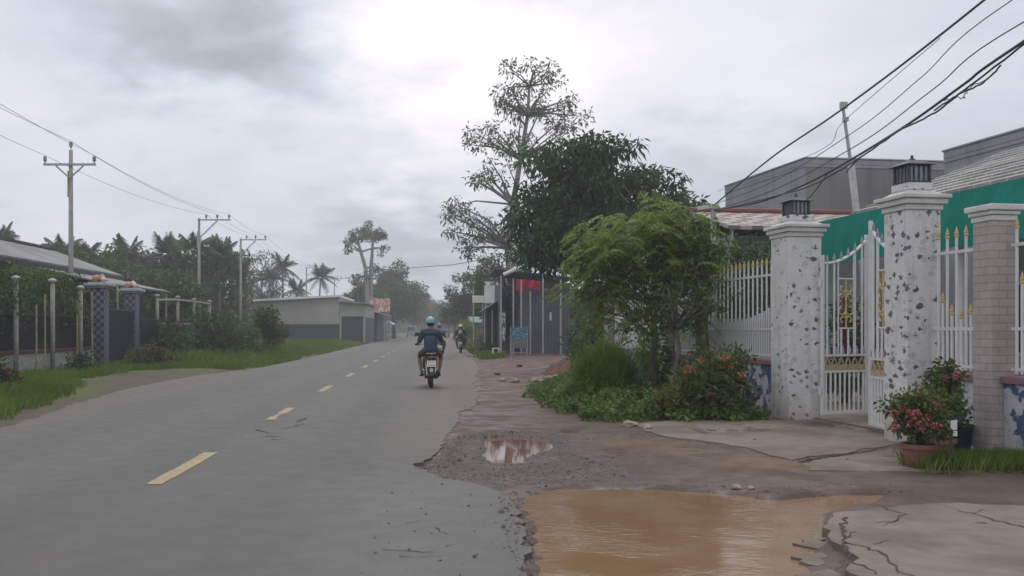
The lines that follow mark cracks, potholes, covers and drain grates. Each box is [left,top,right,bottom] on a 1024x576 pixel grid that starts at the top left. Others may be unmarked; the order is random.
crack [835,507,915,576]
crack [798,446,898,463]
pothole [513,485,910,576]
